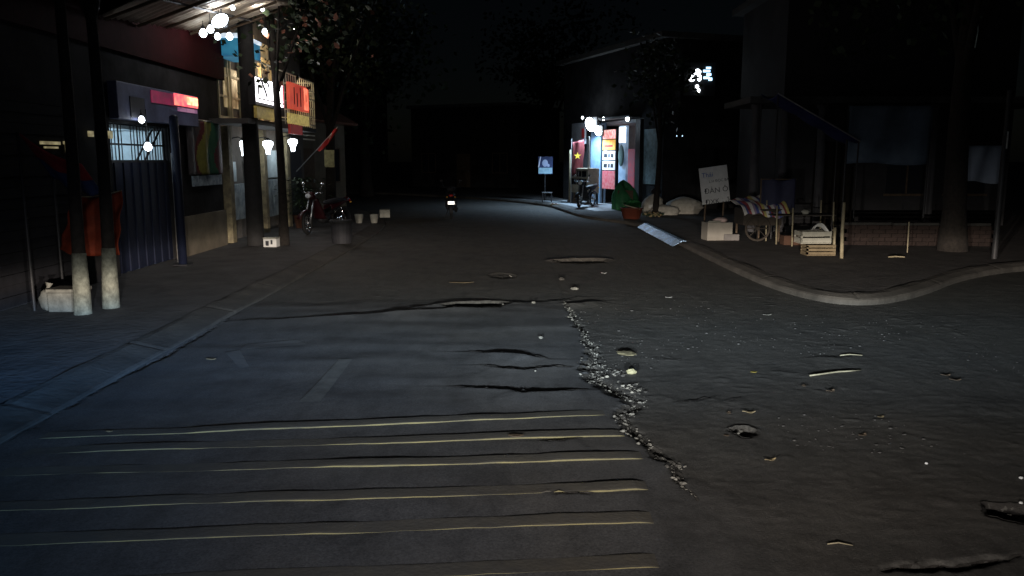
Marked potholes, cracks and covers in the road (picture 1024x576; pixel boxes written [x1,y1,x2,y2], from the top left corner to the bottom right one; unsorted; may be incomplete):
pothole [728,425,758,438]
crack [3,296,741,501]
pothole [440,300,513,308]
pothole [980,501,1024,524]
